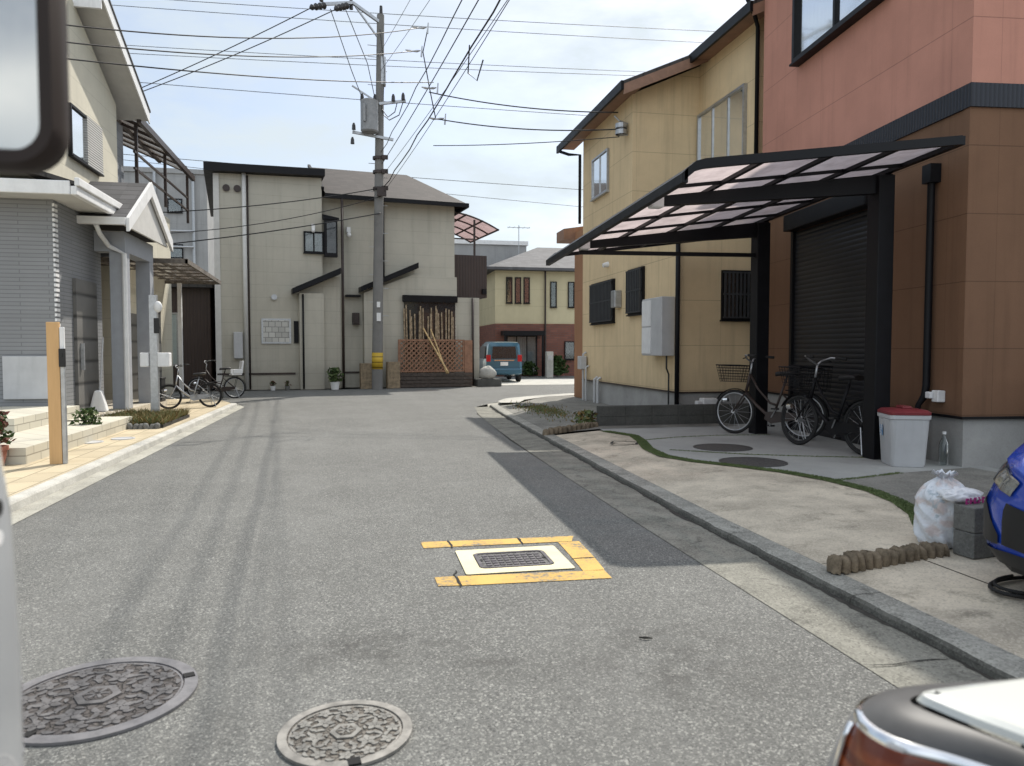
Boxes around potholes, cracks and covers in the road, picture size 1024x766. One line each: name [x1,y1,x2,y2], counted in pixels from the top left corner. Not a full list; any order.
manhole cover [719,457,788,467]
manhole cover [277,700,412,766]
manhole cover [693,443,753,452]
manhole cover [22,656,198,746]
